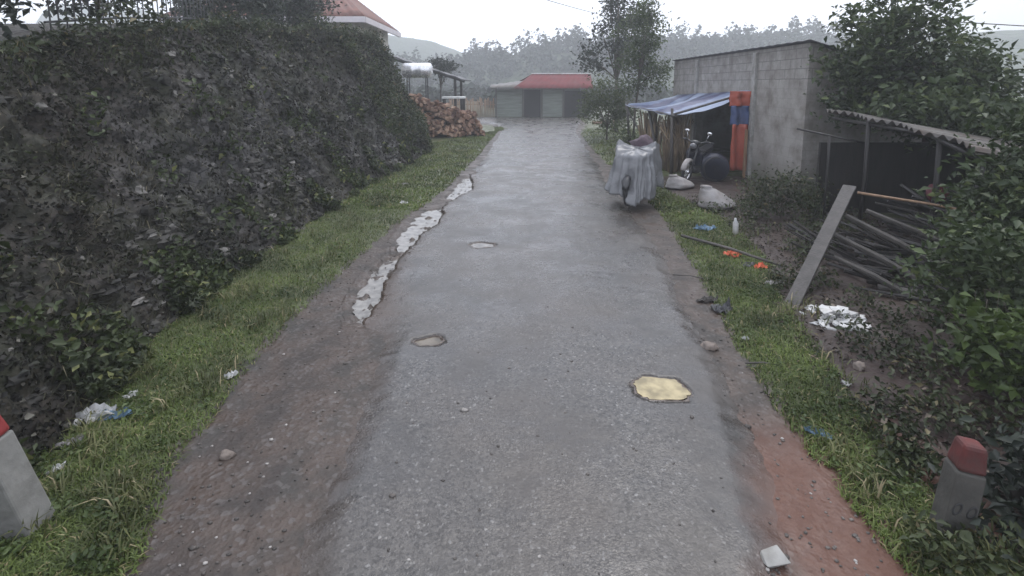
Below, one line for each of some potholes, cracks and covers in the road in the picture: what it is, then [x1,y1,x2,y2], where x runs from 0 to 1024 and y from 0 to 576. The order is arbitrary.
pothole [439,176,472,201]
pothole [339,252,404,328]
pothole [411,335,445,346]
pothole [388,207,443,256]
